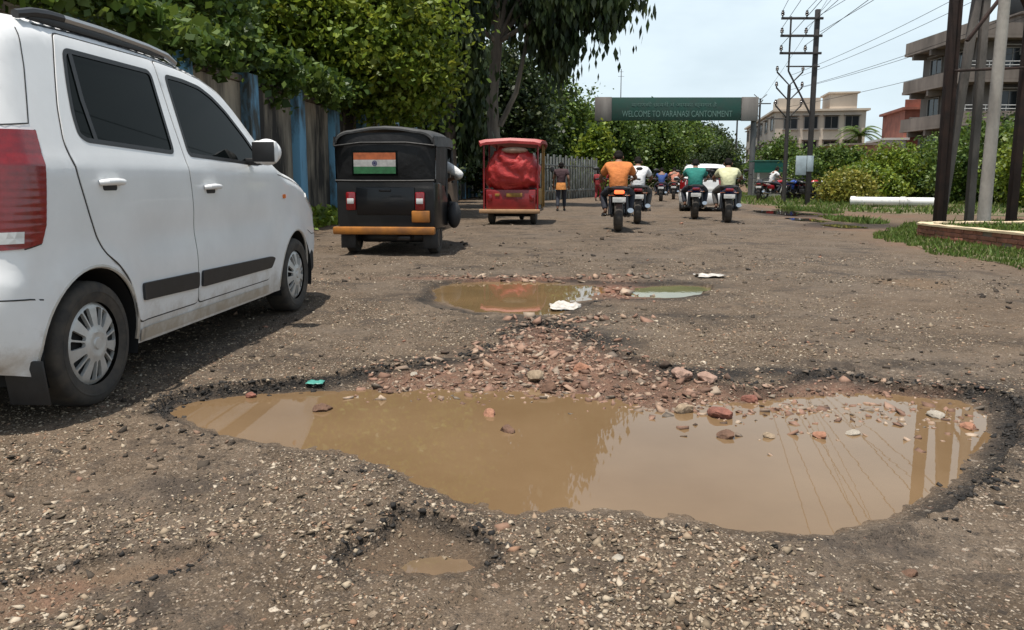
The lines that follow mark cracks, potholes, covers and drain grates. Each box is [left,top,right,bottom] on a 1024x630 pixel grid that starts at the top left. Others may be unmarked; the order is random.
pothole [393,277,713,318]
pothole [326,499,516,586]
pothole [143,320,1024,549]
